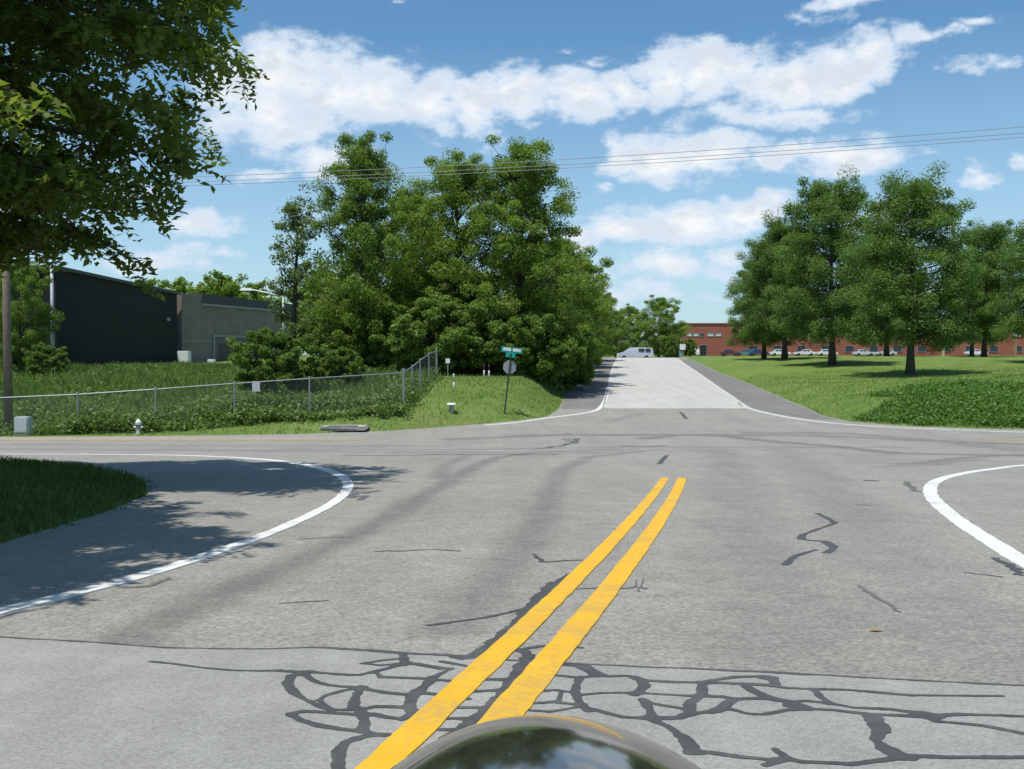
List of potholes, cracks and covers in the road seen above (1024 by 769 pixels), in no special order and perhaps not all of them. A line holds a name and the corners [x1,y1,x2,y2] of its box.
crack [534,554,570,562]
crack [858,585,901,612]
crack [965,557,1024,577]
crack [515,645,584,653]
crack [904,481,923,492]
